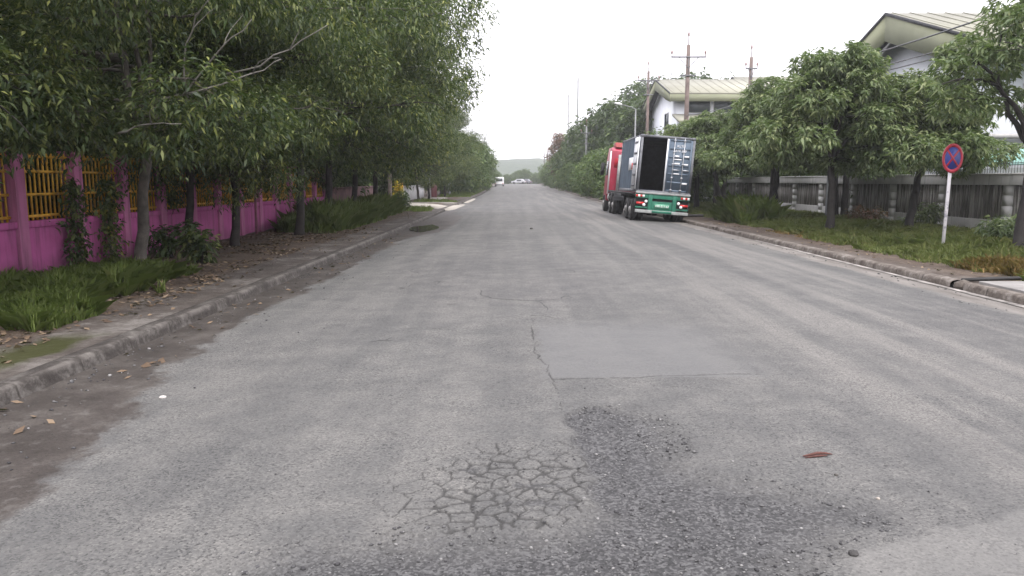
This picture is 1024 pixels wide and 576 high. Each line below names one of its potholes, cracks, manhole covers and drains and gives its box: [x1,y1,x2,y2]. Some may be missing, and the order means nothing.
crack [350,433,591,532]
crack [480,290,572,319]
